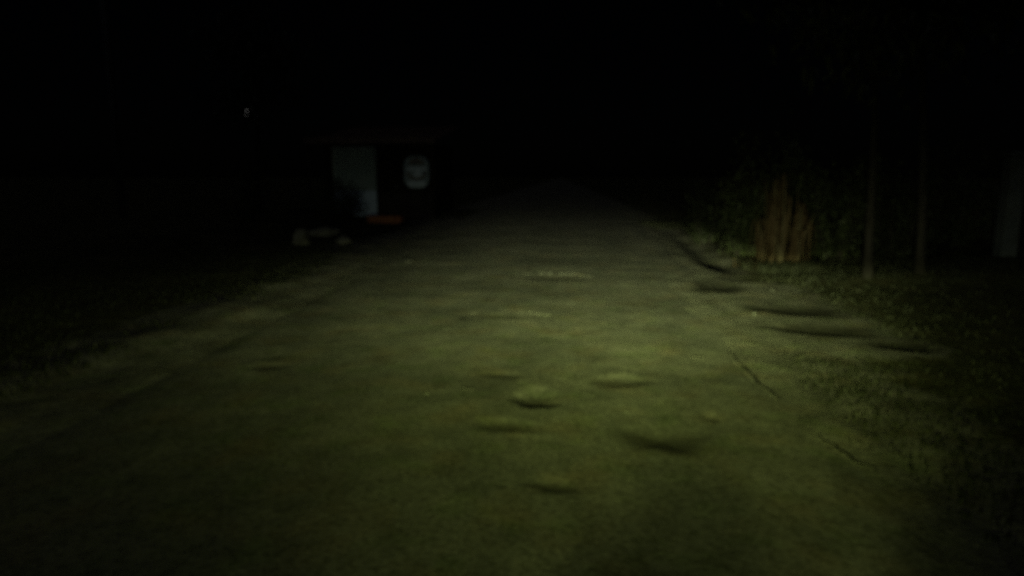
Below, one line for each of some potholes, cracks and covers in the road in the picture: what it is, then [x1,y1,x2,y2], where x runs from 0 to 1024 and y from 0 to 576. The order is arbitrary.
pothole [444,412,571,439]
pothole [570,370,674,393]
pothole [492,468,610,503]
pothole [466,367,544,384]
pothole [491,381,577,415]
pothole [597,415,733,465]
crack [728,352,780,400]
crack [814,432,879,473]
